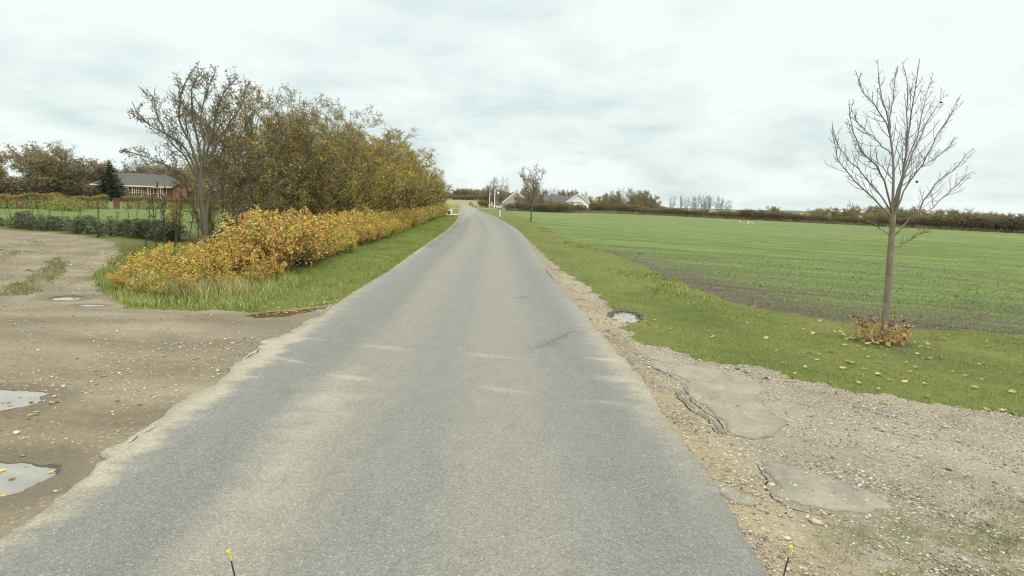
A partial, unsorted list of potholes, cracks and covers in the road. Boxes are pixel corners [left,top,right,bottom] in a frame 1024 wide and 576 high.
pothole [0,389,49,411]
pothole [606,309,644,323]
crack [646,364,730,439]
pothole [0,461,64,497]
